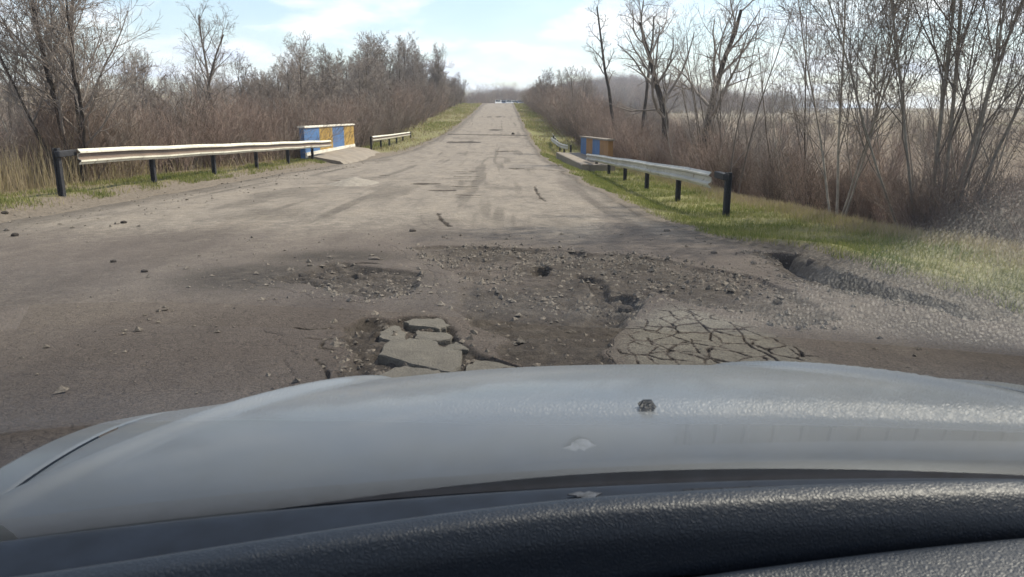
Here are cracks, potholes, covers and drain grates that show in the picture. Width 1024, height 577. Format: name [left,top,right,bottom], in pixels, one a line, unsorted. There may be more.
pothole [390,243,869,367]
pothole [325,312,523,378]
pothole [247,260,440,303]
crack [606,300,816,365]
pothole [737,250,961,316]
